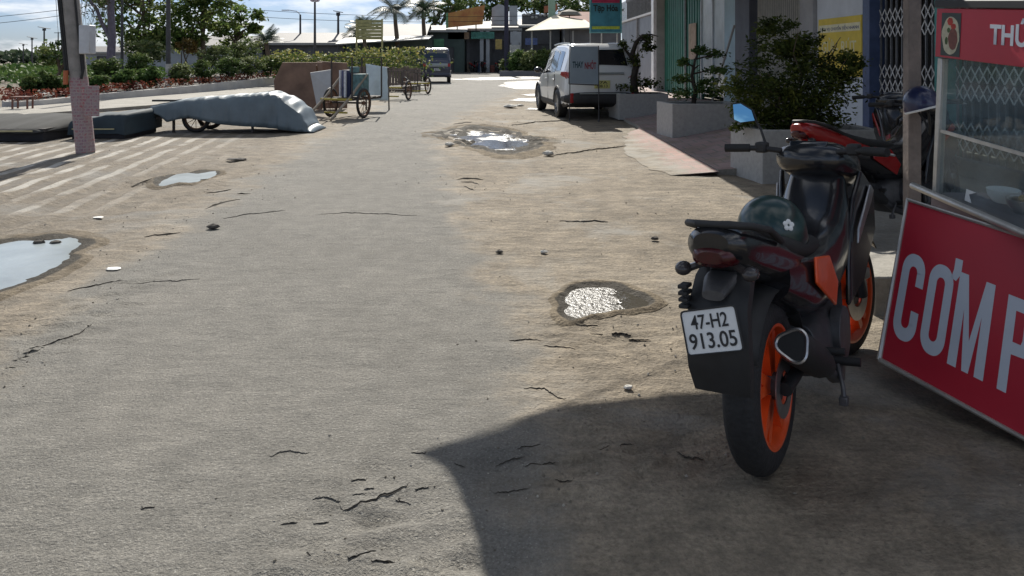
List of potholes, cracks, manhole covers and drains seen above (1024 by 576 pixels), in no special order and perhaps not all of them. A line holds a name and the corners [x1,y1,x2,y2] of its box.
crack [204,189,283,219]
pothole [145,169,227,189]
crack [1,324,92,374]
crack [69,278,200,291]
crack [348,548,400,563]
crack [269,448,309,456]
crack [555,146,622,155]
pothole [548,279,668,327]
pothole [0,230,110,301]
pothole [420,124,562,159]
crack [524,386,566,399]
crack [676,450,703,459]
